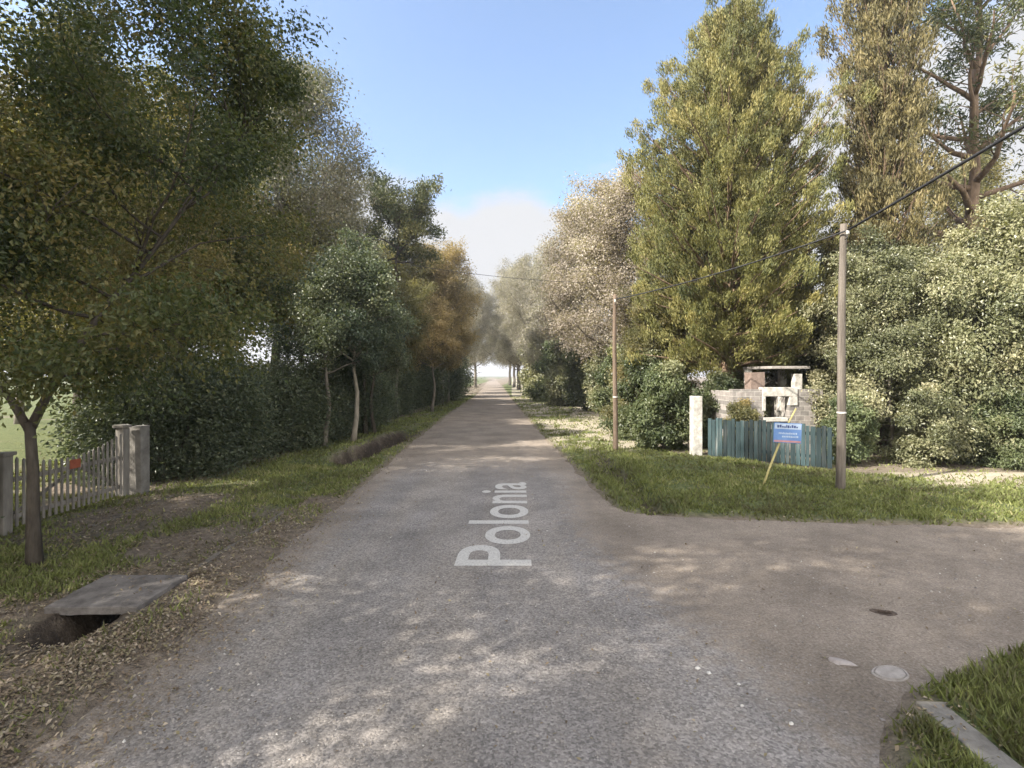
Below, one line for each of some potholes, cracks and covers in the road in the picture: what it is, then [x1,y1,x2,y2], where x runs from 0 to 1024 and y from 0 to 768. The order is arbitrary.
pothole [869,608,898,616]
manhole cover [871,665,909,682]
